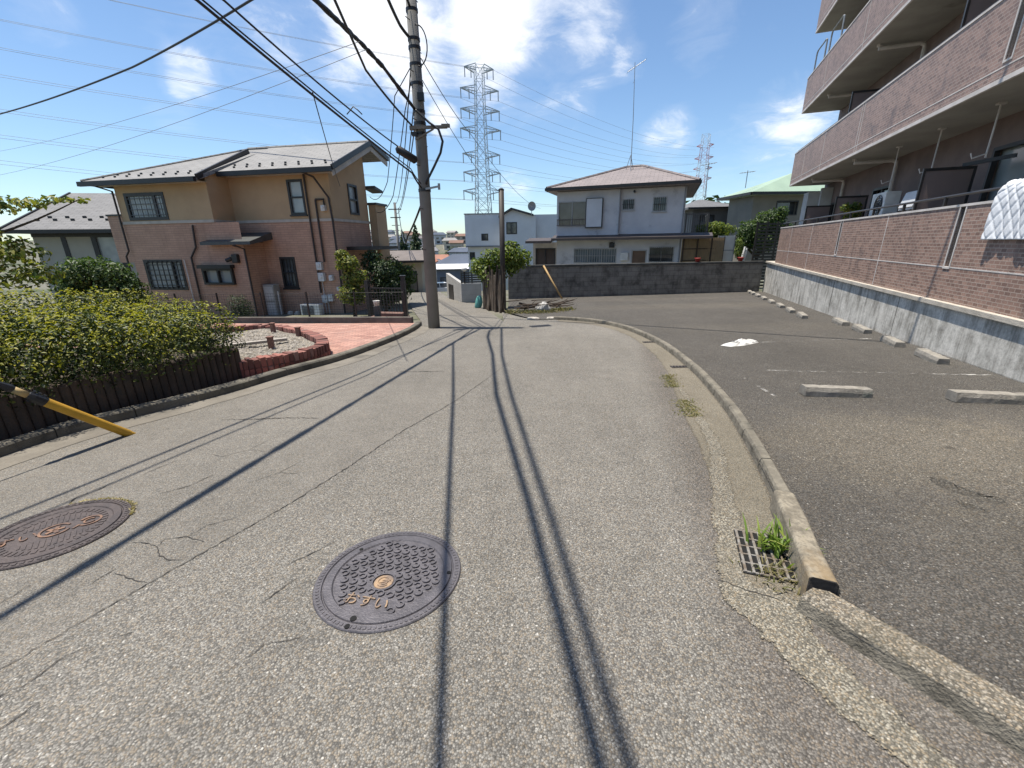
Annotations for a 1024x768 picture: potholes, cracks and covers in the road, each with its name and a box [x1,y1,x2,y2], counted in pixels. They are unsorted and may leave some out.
crack [90,517,236,584]
manhole cover [0,499,132,571]
manhole cover [312,531,461,634]
drain grate [733,528,797,583]
